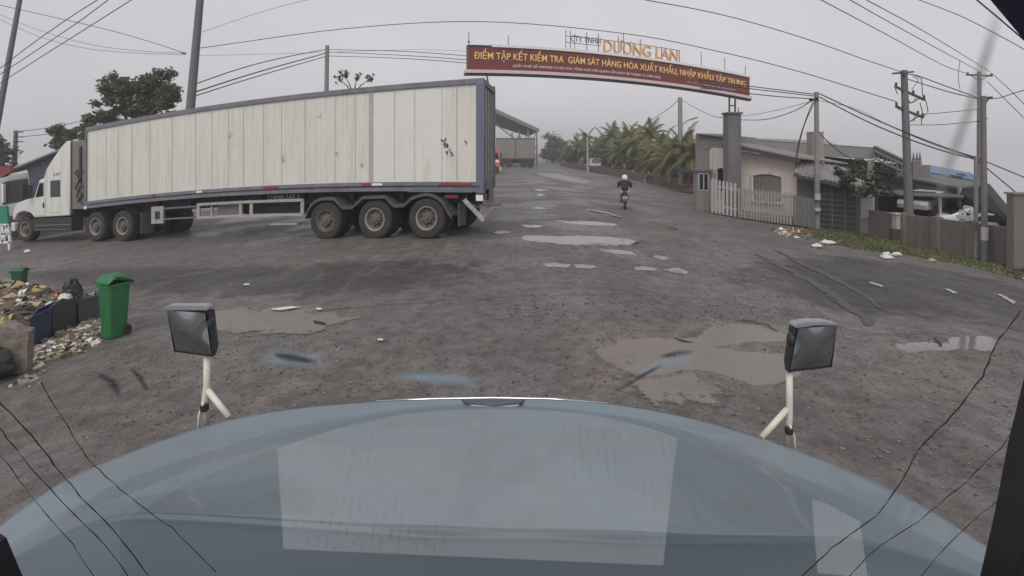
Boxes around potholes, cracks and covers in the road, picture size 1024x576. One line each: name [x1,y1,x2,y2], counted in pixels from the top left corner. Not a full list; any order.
pothole [521,235,636,246]
pothole [596,323,801,385]
pothole [910,335,997,351]
pothole [599,248,636,256]
